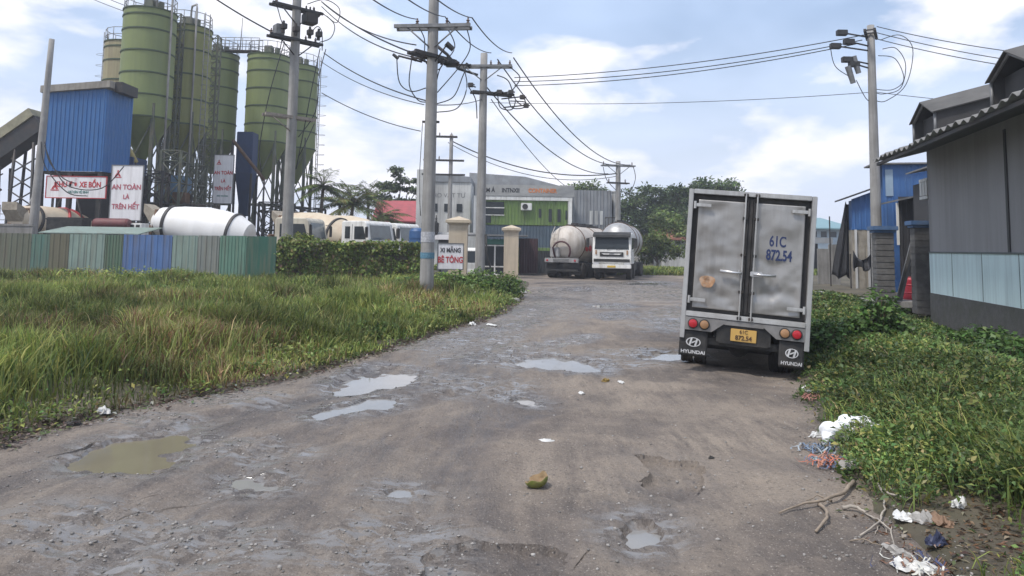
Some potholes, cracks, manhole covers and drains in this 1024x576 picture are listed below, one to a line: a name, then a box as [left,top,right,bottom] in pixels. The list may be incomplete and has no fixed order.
pothole [508,397,539,406]
pothole [509,355,605,373]
pothole [326,365,421,397]
pothole [634,454,707,502]
pothole [420,540,568,576]
pothole [227,473,286,496]
pothole [619,519,665,549]
pothole [307,396,400,420]
pothole [65,434,204,474]
pothole [383,488,415,498]
